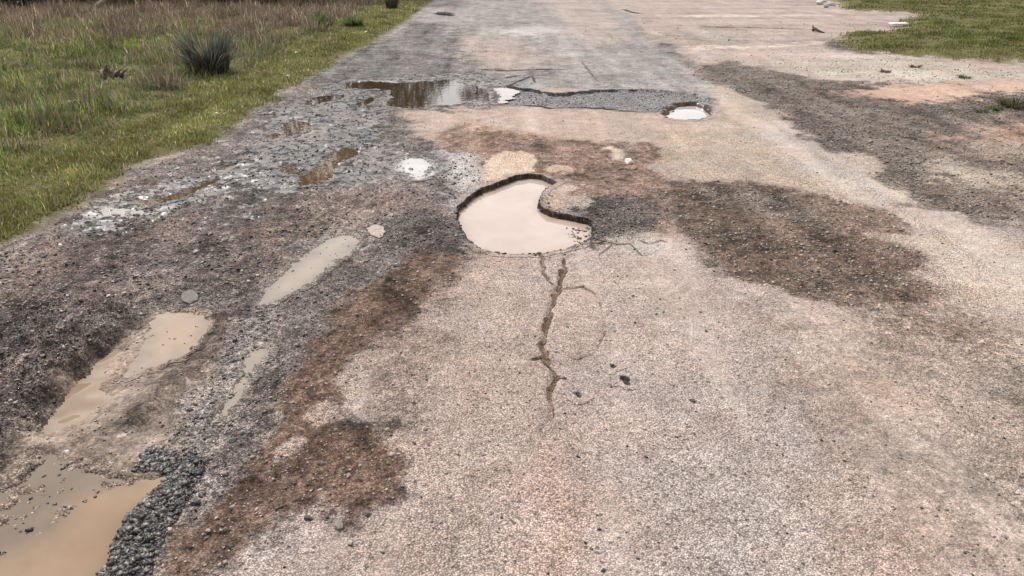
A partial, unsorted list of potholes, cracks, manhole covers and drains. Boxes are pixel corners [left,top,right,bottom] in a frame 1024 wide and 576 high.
crack [592,237,666,255]
pothole [111,305,219,382]
